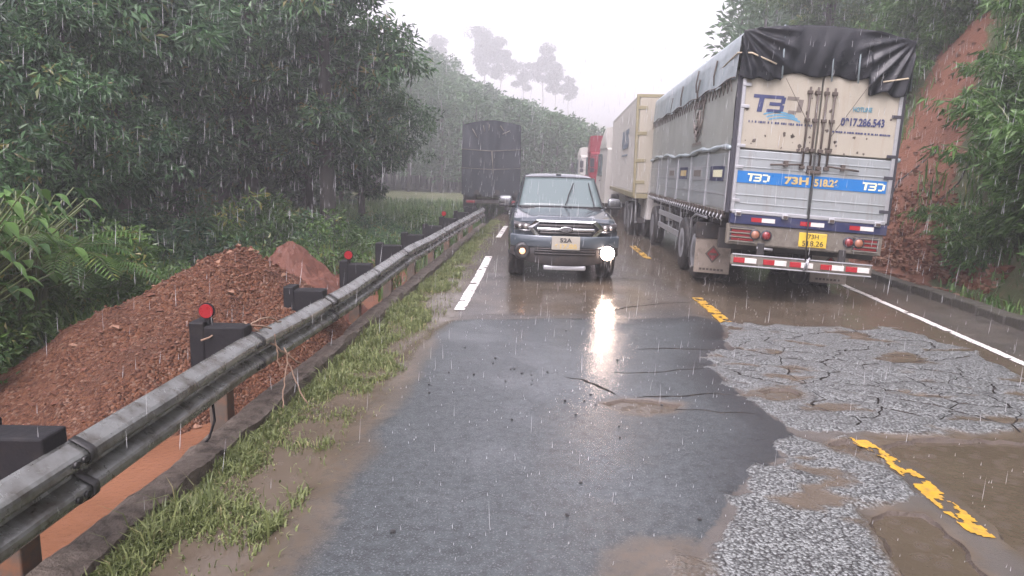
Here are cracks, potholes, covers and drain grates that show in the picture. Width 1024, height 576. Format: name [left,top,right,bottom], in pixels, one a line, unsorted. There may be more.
pothole [601,399,681,416]
crack [566,368,706,395]
crack [634,393,755,414]
pothole [882,437,1024,555]
pothole [869,511,989,576]
pothole [758,388,802,400]
crack [721,327,1022,432]
